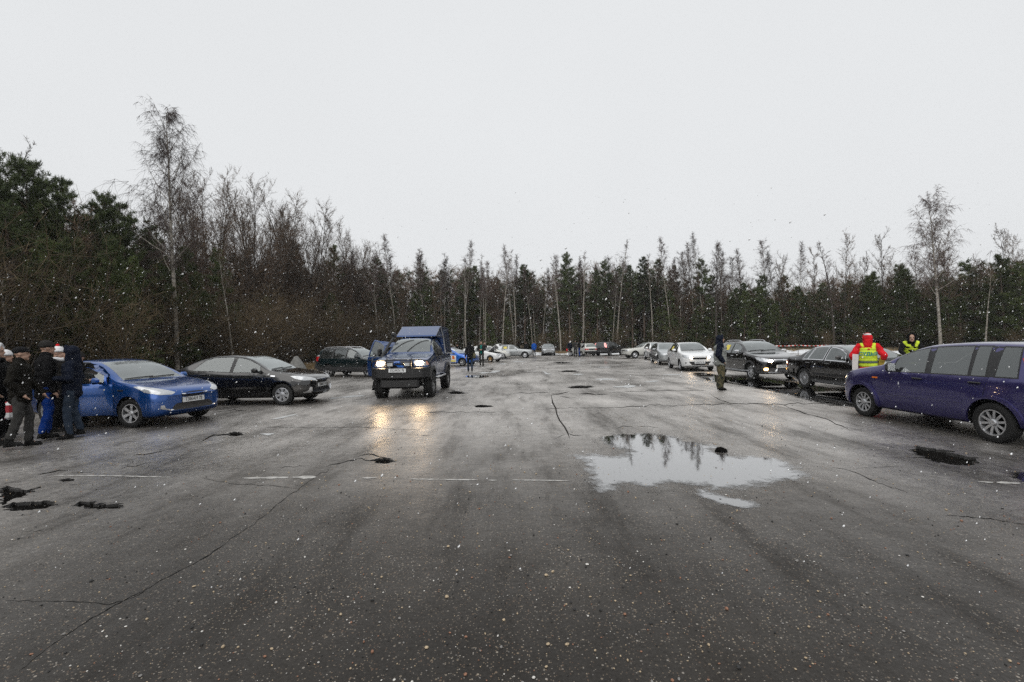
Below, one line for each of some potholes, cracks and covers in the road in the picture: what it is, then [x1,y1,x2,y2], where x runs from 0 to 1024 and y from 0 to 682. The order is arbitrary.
crack [947,515,1024,525]
crack [833,466,903,491]
crack [520,388,848,438]
pothole [2,500,57,511]
pothole [73,501,124,510]
pothole [909,445,979,466]
crack [5,470,329,670]
pothole [0,486,41,505]
